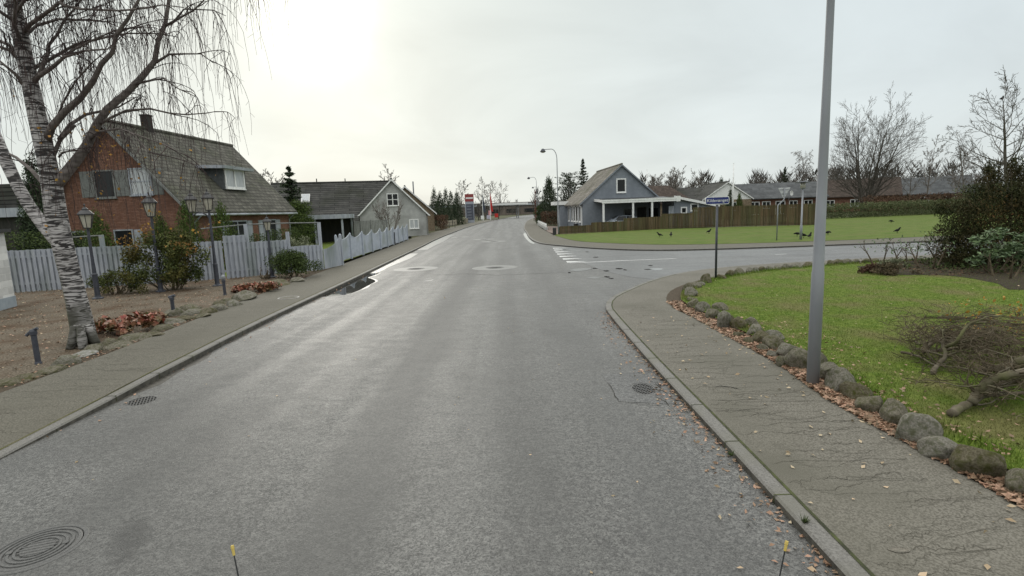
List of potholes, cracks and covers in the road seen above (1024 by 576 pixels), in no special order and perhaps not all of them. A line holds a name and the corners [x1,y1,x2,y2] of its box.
manhole cover [0,524,90,575]
drain grate [631,383,656,395]
drain grate [125,396,159,406]
